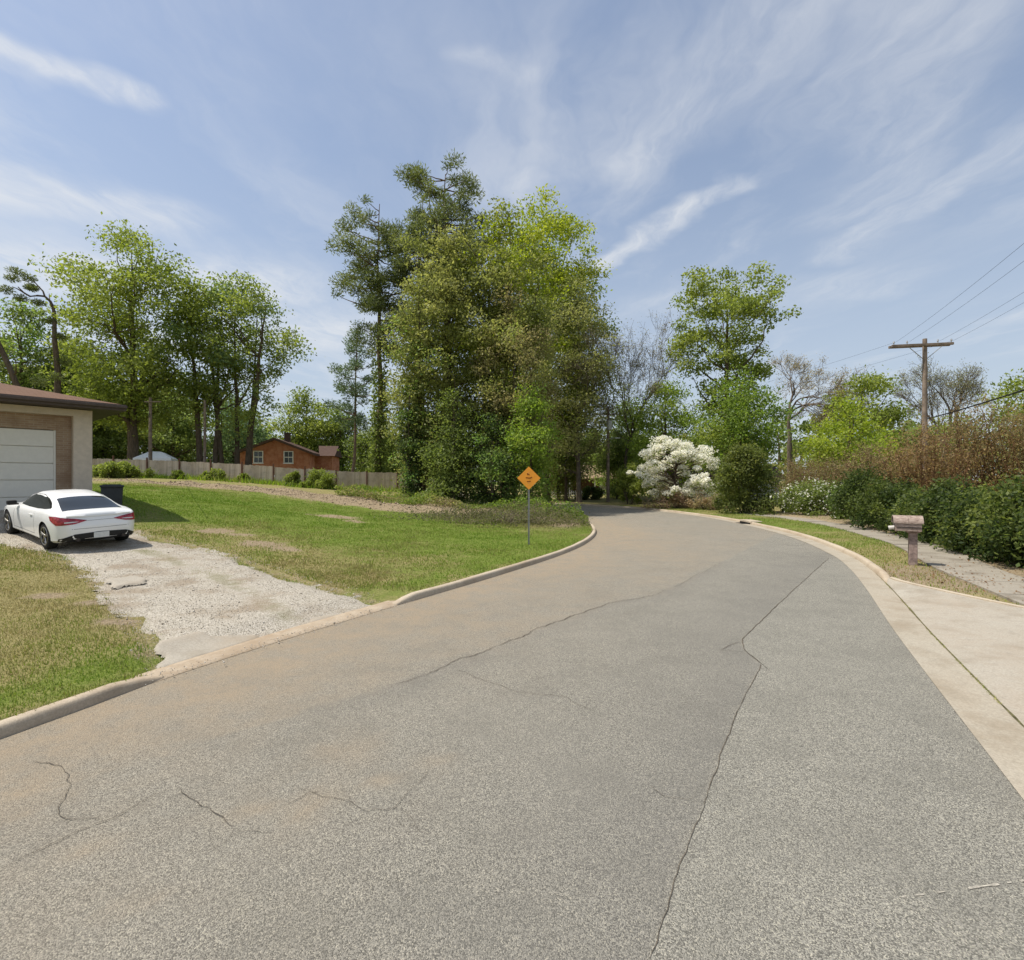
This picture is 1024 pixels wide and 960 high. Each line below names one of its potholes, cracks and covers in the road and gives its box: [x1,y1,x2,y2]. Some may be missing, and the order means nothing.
crack [7,761,272,866]
crack [404,563,720,711]
crack [277,769,429,833]
